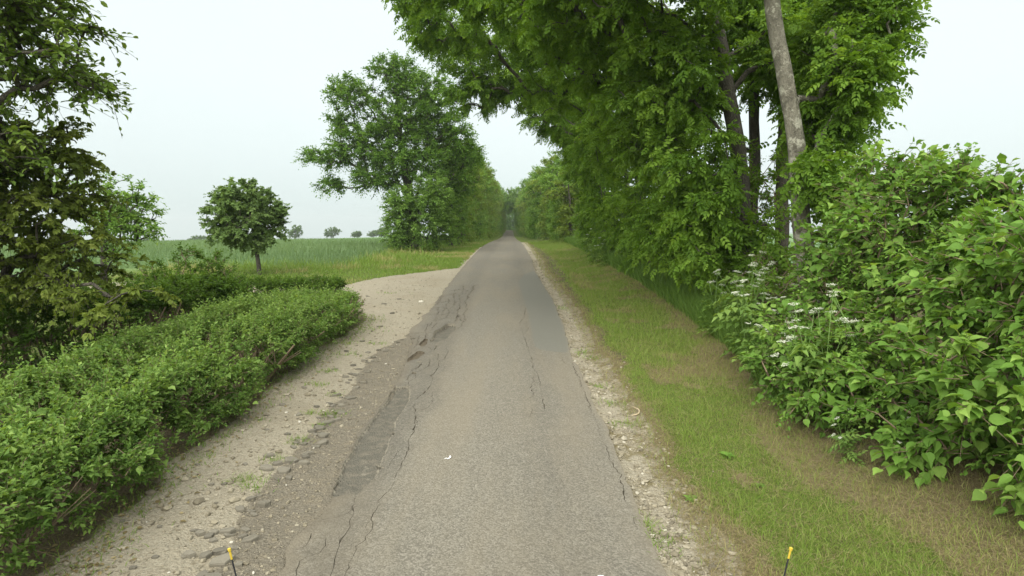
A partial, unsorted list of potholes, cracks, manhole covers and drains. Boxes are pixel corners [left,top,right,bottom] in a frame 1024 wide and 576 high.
pothole [430,323,457,342]
crack [521,308,545,415]
pothole [331,385,411,497]
crack [295,285,475,576]
crack [560,357,635,523]
